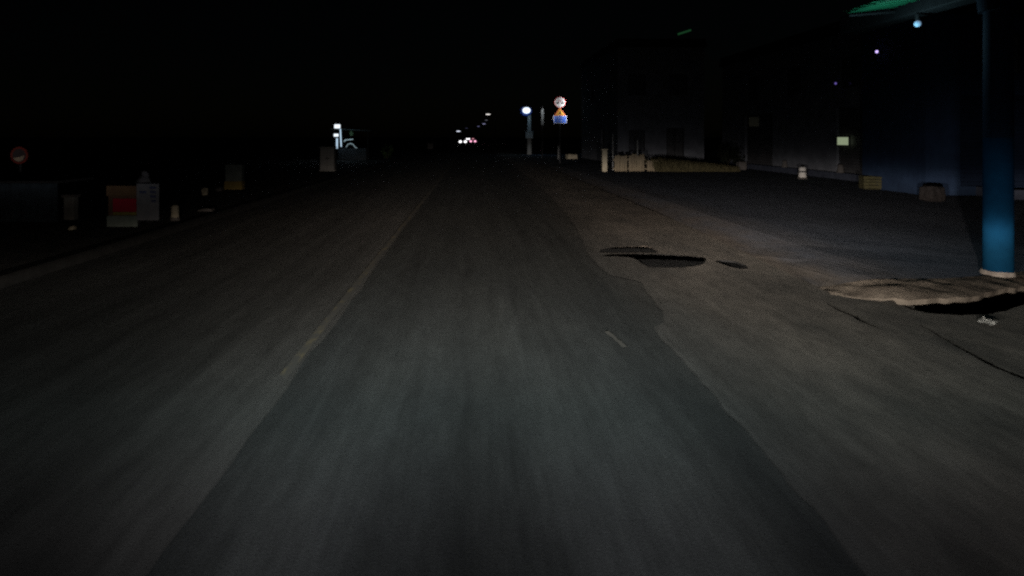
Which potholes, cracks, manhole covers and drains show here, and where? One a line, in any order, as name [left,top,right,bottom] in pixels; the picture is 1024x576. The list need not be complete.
crack [827,303,880,329]
pothole [714,260,749,269]
pothole [599,248,706,268]
crack [903,305,1024,379]
